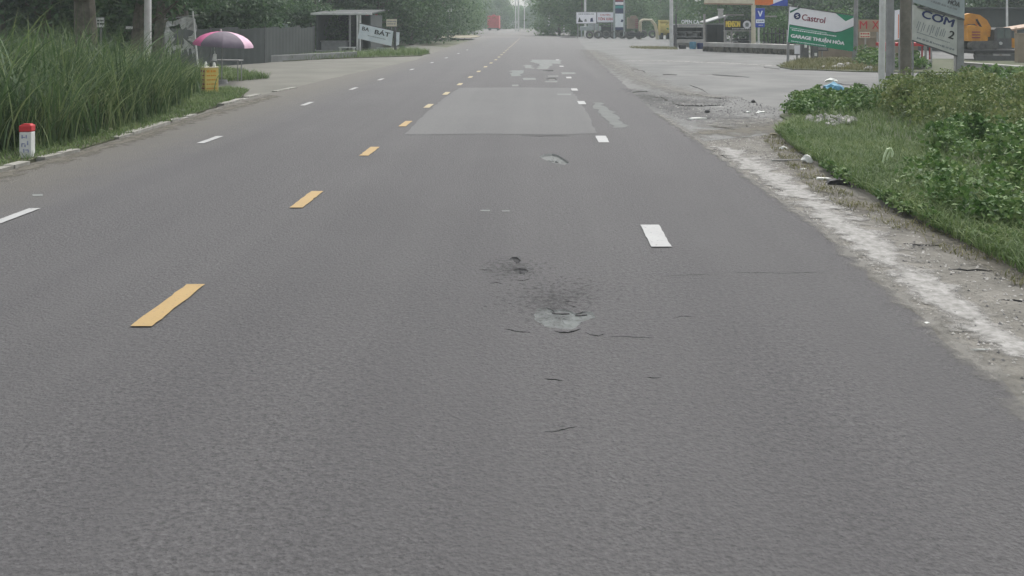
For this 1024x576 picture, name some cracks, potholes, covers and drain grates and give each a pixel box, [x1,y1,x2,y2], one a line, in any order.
pothole [534,307,595,330]
pothole [540,154,569,165]
crack [555,328,654,338]
